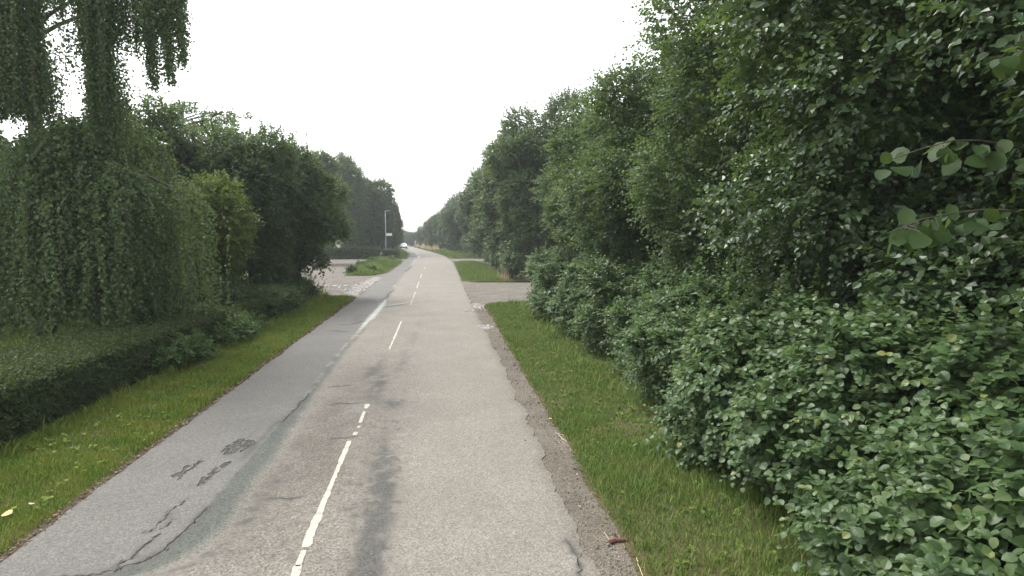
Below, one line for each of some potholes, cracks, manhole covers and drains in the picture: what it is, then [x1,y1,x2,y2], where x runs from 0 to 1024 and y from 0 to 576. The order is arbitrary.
pothole [171,460,204,480]
pothole [221,438,258,455]
crack [565,538,583,576]
pothole [196,461,232,486]
crack [54,498,211,576]
